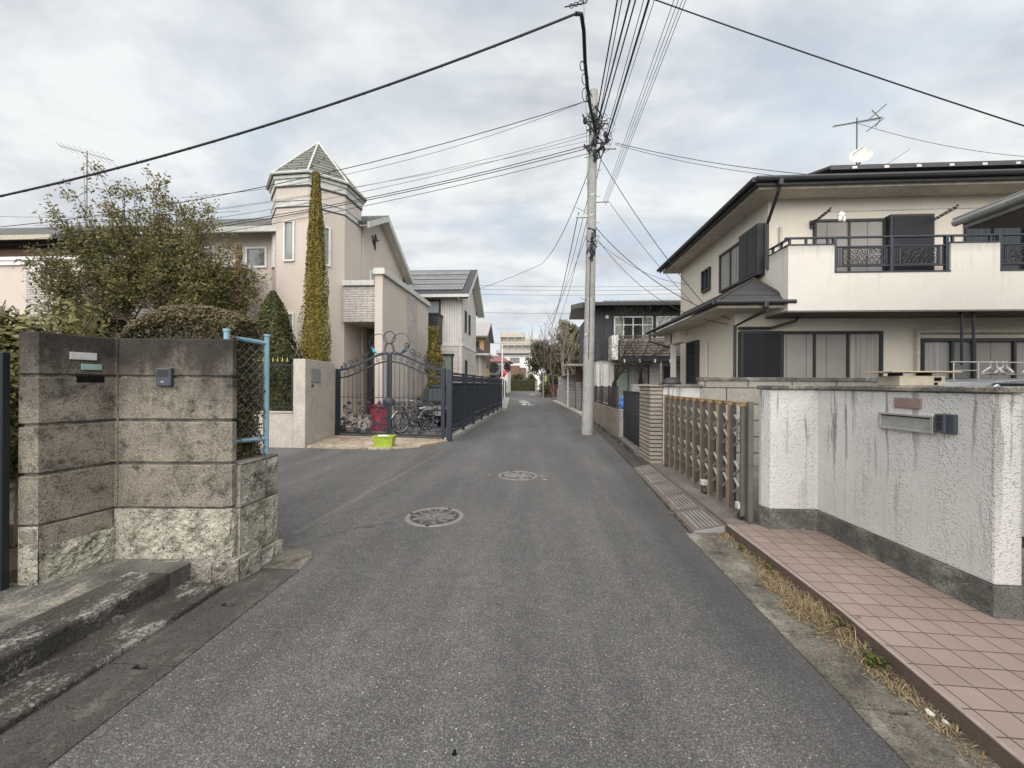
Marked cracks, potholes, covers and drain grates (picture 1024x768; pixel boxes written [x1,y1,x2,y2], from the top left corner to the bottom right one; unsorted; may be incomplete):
drain grate [649,481,684,497]
drain grate [675,507,726,533]
manhole cover [498,471,538,480]
manhole cover [405,507,464,527]
drain grate [660,492,703,513]
drain grate [640,472,670,485]
drain grate [632,464,659,476]
